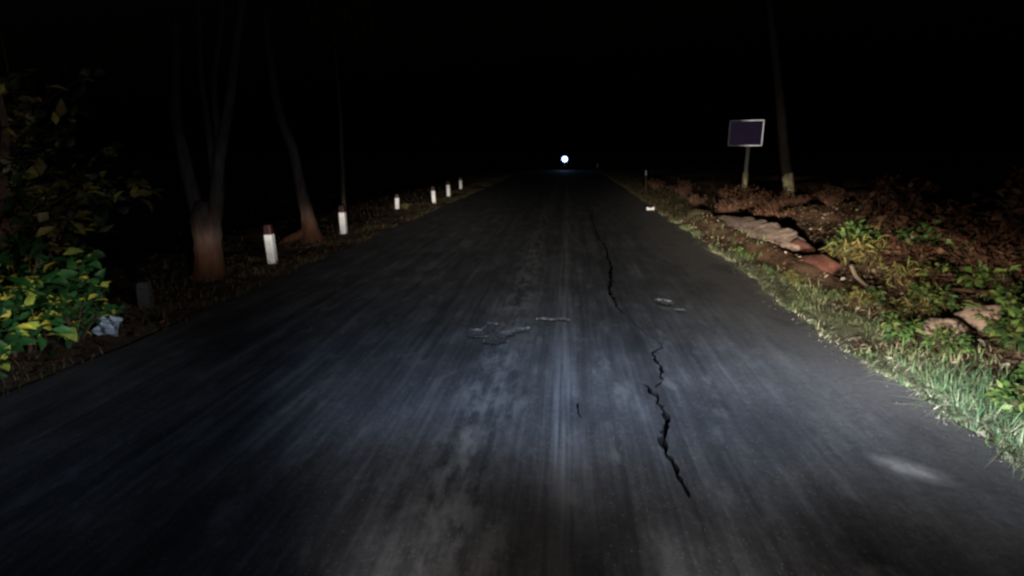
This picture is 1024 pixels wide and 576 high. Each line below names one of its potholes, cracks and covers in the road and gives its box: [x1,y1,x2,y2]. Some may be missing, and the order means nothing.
crack [591,210,690,498]
pothole [467,322,530,346]
pothole [654,298,674,306]
